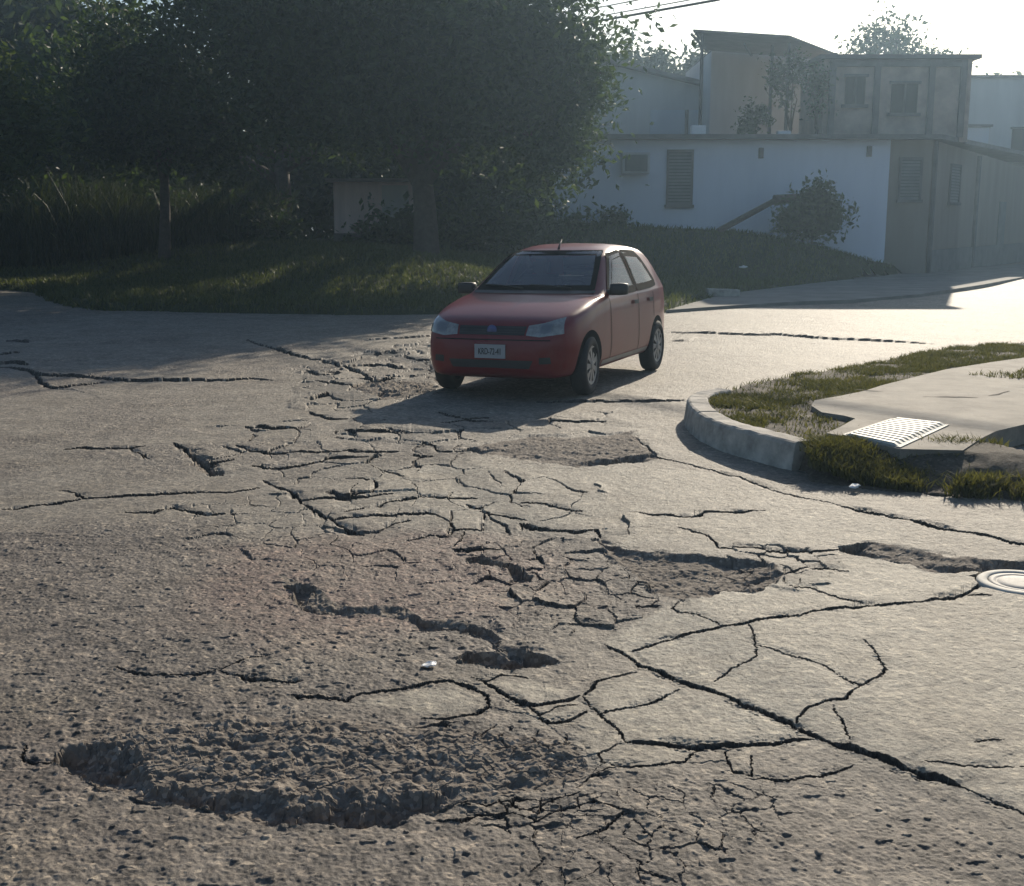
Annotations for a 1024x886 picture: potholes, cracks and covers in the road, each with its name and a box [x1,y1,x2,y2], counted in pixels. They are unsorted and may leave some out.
pothole [52,713,590,829]
pothole [452,647,560,671]
crack [925,738,1024,769]
manhole cover [976,569,1024,595]
crack [116,510,992,884]
crack [1,335,684,619]
pothole [838,542,1024,574]
pothole [279,573,502,646]
pothole [597,538,786,601]
crack [21,745,52,765]
pothole [459,431,658,468]
